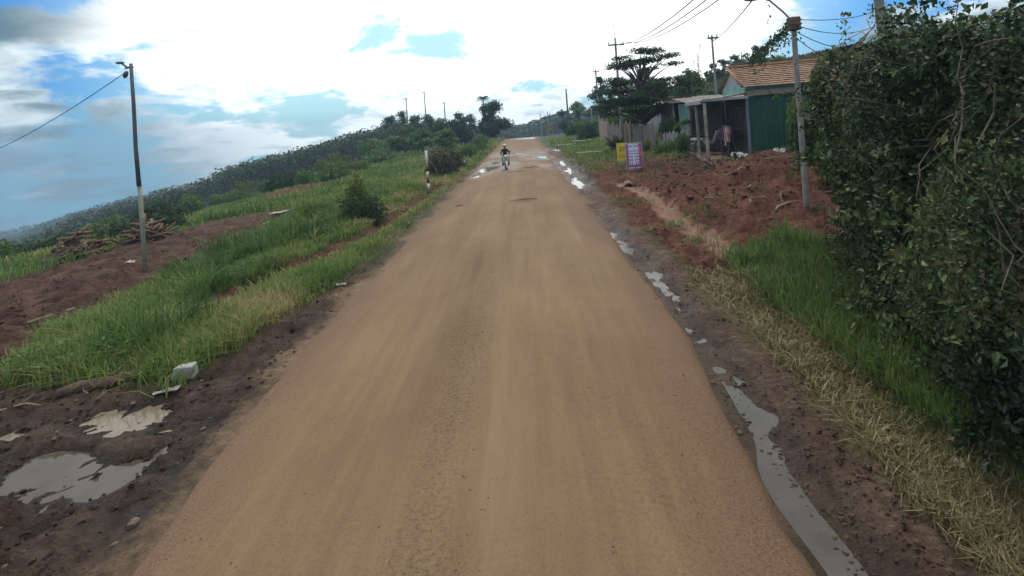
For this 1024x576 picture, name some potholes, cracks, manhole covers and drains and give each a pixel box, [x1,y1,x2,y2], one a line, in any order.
pothole [475,165,502,174]
